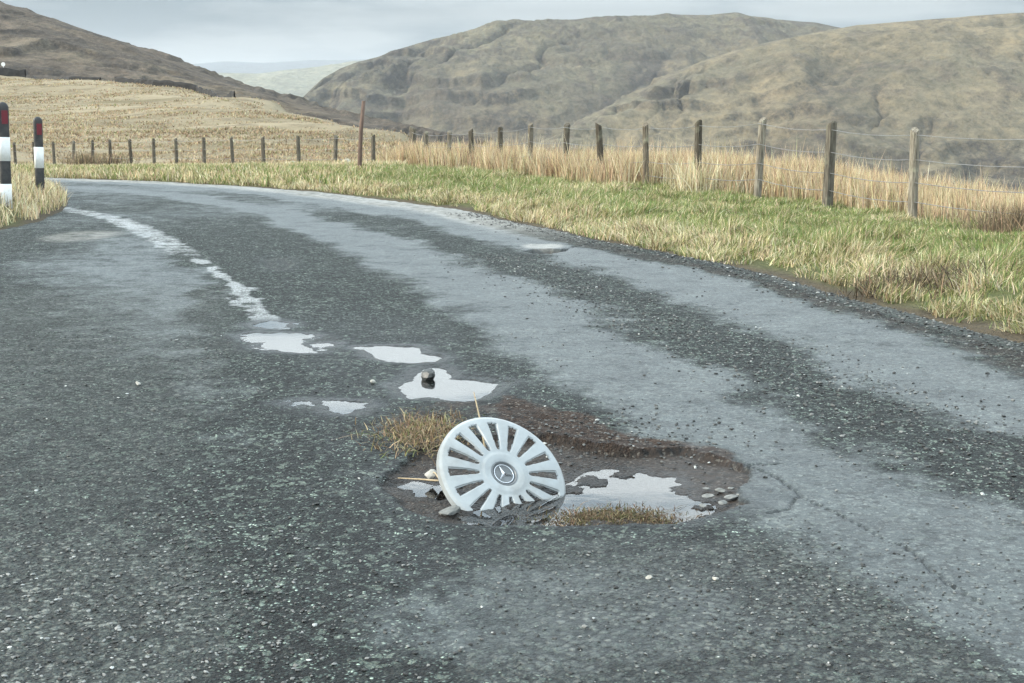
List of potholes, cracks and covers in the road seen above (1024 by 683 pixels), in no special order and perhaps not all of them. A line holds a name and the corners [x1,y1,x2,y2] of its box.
pothole [371,363,528,404]
pothole [360,429,768,533]
